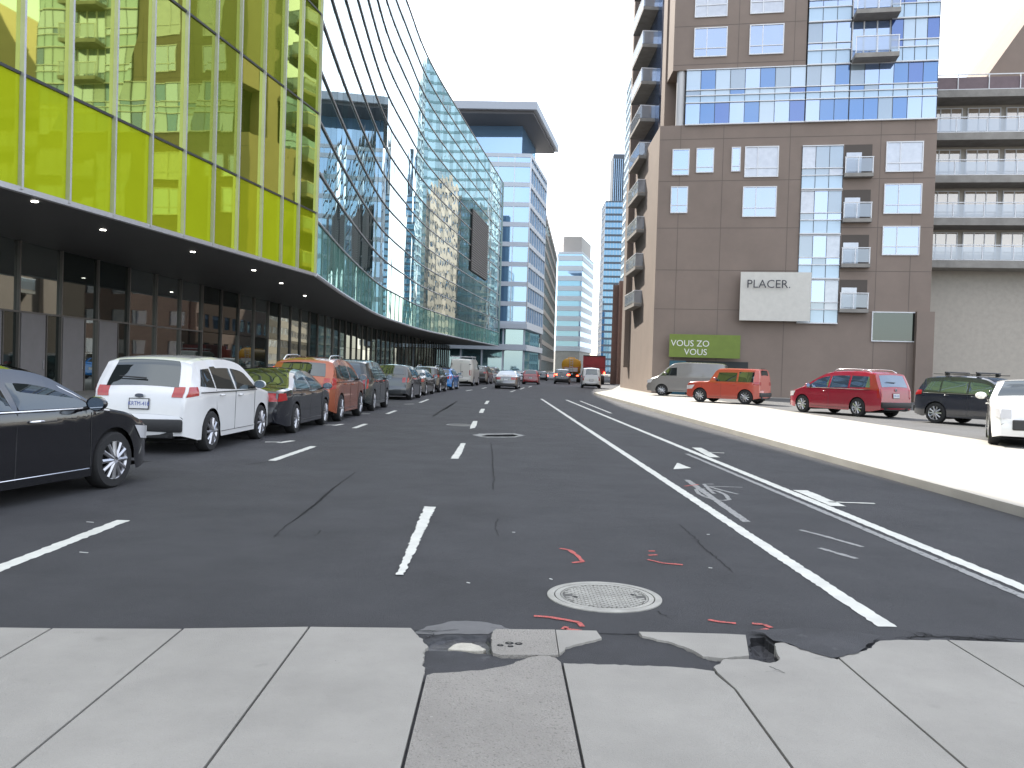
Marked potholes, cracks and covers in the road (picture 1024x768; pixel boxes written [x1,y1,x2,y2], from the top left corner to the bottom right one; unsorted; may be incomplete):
crack [678,524,732,572]
pothole [748,637,778,663]
crack [273,472,355,538]
manhole cover [547,581,662,613]
pothole [426,635,492,655]
crack [895,630,1024,642]
